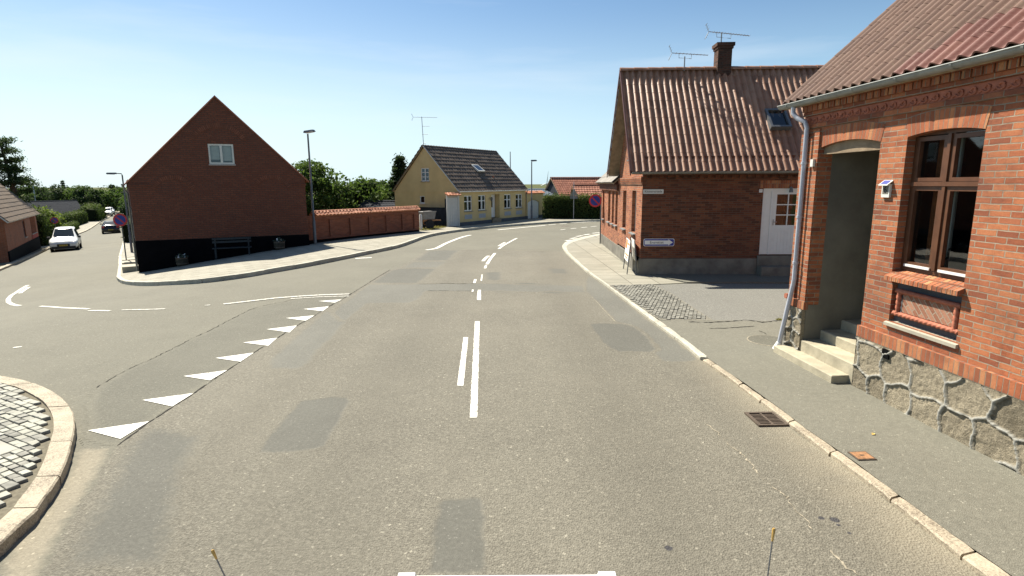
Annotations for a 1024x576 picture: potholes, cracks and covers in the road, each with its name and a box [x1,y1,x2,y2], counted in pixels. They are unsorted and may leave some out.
crack [706,424,814,530]
manhole cover [747,335,783,346]
utility cover [847,451,877,461]
crack [830,550,857,574]
drain grate [744,411,789,427]
